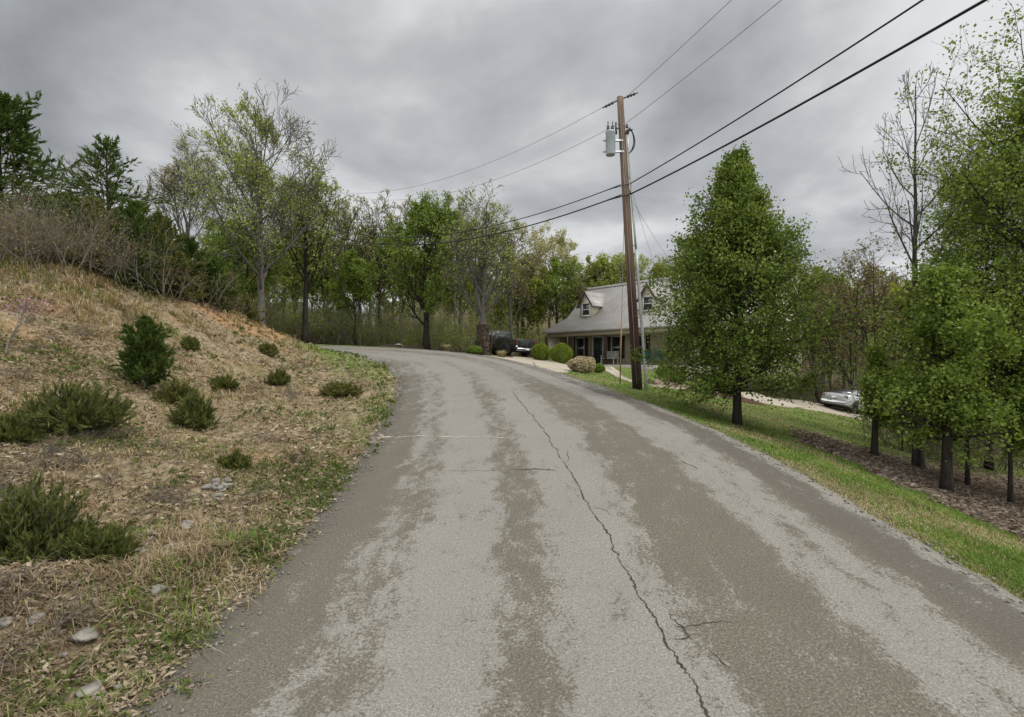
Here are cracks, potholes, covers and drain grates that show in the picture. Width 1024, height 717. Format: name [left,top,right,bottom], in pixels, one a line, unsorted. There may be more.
crack [513,392,727,717]
